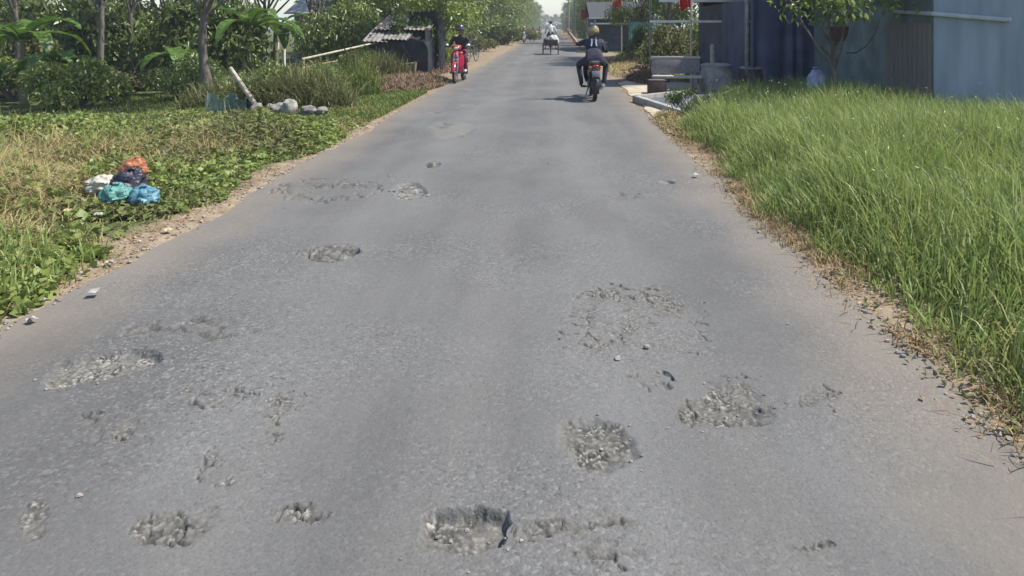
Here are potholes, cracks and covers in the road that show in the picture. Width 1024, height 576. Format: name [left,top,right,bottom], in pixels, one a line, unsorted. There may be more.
pothole [400,504,524,574]
pothole [388,182,430,200]
pothole [553,414,669,475]
pothole [33,348,165,391]
